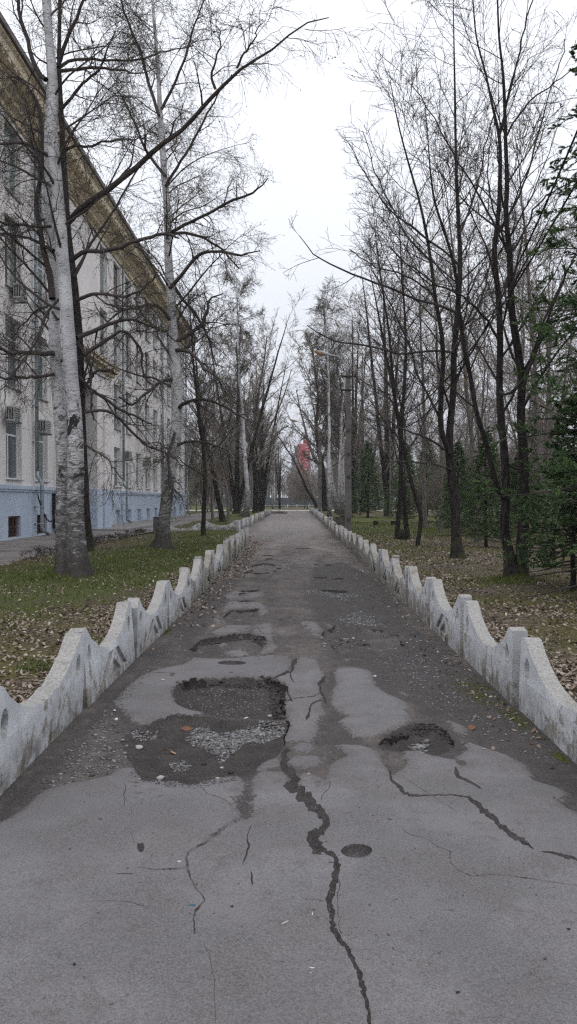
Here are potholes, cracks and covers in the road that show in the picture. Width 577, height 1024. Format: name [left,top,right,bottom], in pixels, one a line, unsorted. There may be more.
crack [280,747,371,1024]
crack [389,767,577,886]
pothole [223,608,259,621]
crack [116,785,253,1024]
crack [215,626,327,720]
pothole [173,677,288,720]
pothole [377,723,455,755]
pothole [189,633,267,658]
